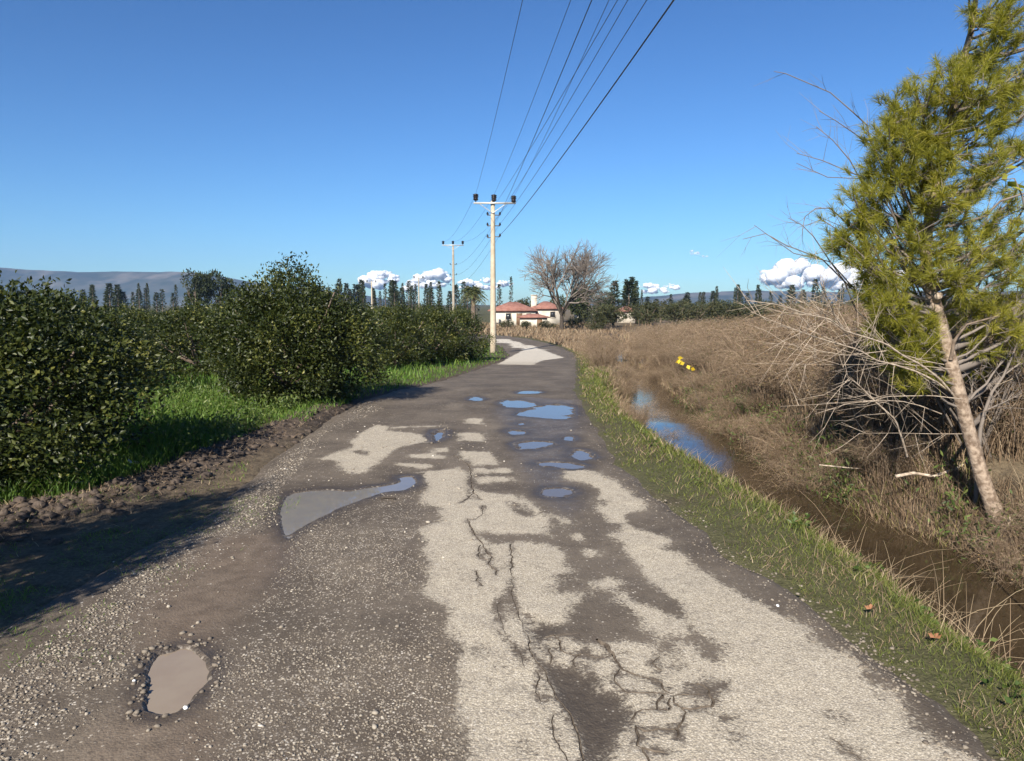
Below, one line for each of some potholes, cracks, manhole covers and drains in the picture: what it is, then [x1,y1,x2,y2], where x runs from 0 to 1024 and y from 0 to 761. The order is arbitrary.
pothole [498,399,537,408]
pothole [512,440,558,450]
pothole [429,429,446,442]
pothole [141,644,214,715]
pothole [277,475,417,540]
pothole [568,449,597,460]
pothole [540,487,576,499]
pothole [516,403,577,419]
crack [453,454,715,761]
